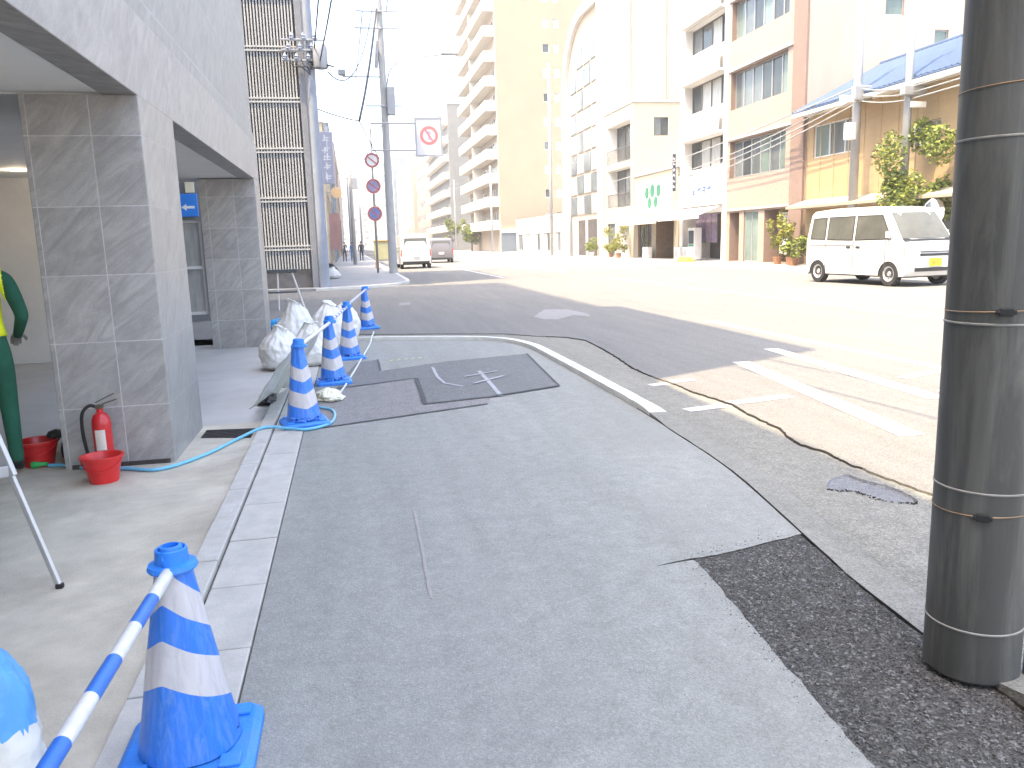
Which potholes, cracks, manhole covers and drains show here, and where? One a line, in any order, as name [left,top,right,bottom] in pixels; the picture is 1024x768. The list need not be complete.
drain grate [201,428,255,438]
